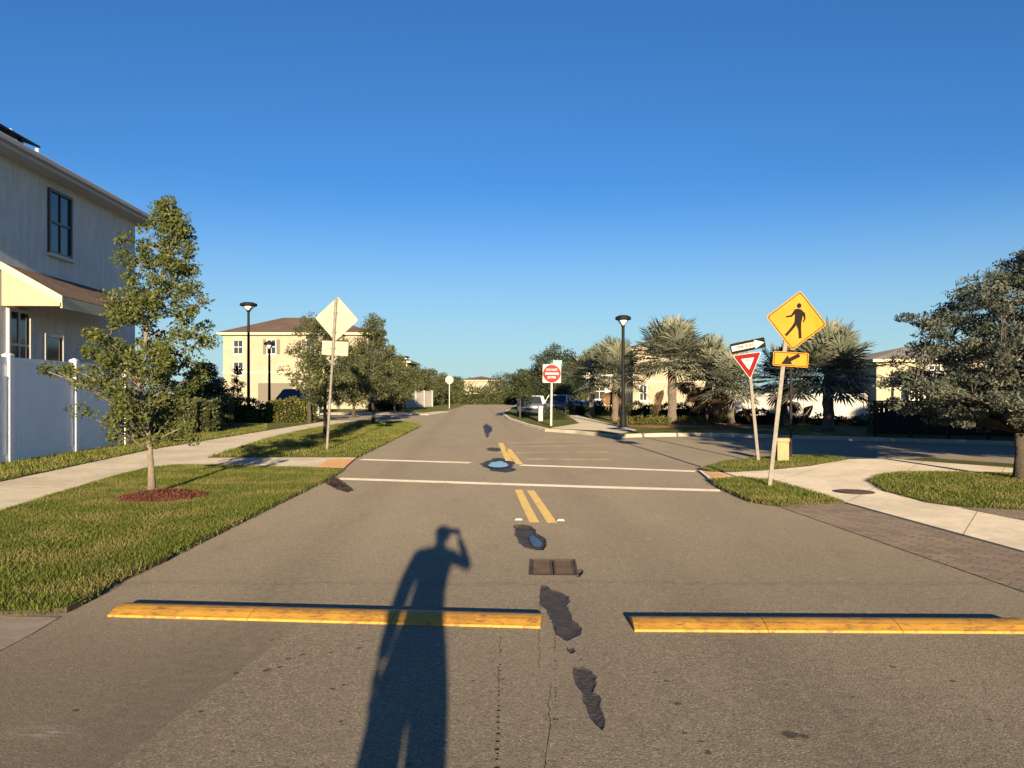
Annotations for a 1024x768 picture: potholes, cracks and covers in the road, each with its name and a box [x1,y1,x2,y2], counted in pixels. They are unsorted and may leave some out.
crack [538,602,559,768]
pothole [539,585,582,641]
pothole [479,458,516,473]
pothole [513,524,547,550]
pothole [572,667,605,730]
